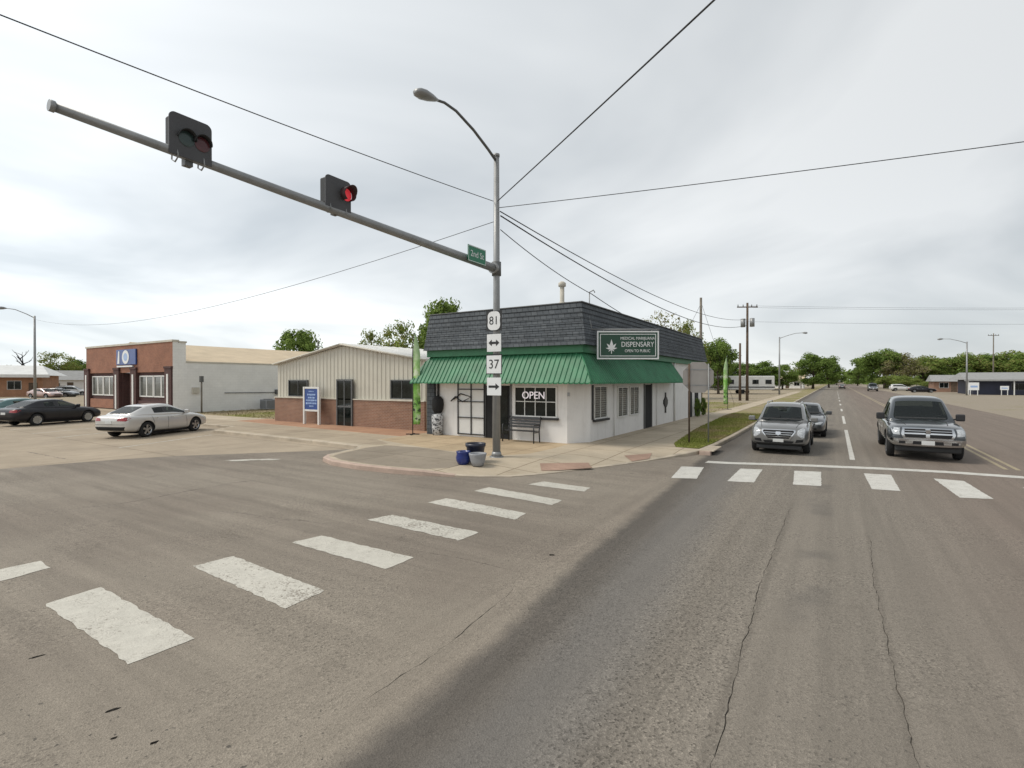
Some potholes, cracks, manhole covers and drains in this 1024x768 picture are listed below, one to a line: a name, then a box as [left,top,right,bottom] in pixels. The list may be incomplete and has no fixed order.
crack [363,595,508,701]
crack [710,511,789,768]
crack [870,540,920,767]
